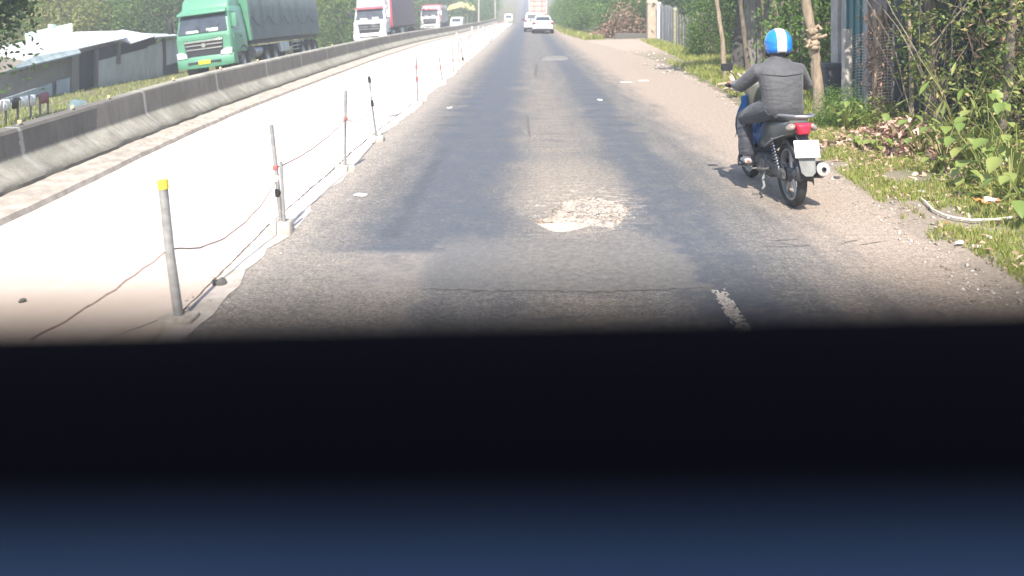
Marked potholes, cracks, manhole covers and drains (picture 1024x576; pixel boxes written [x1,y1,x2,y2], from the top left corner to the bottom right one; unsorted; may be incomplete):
pothole [531,197,628,232]
